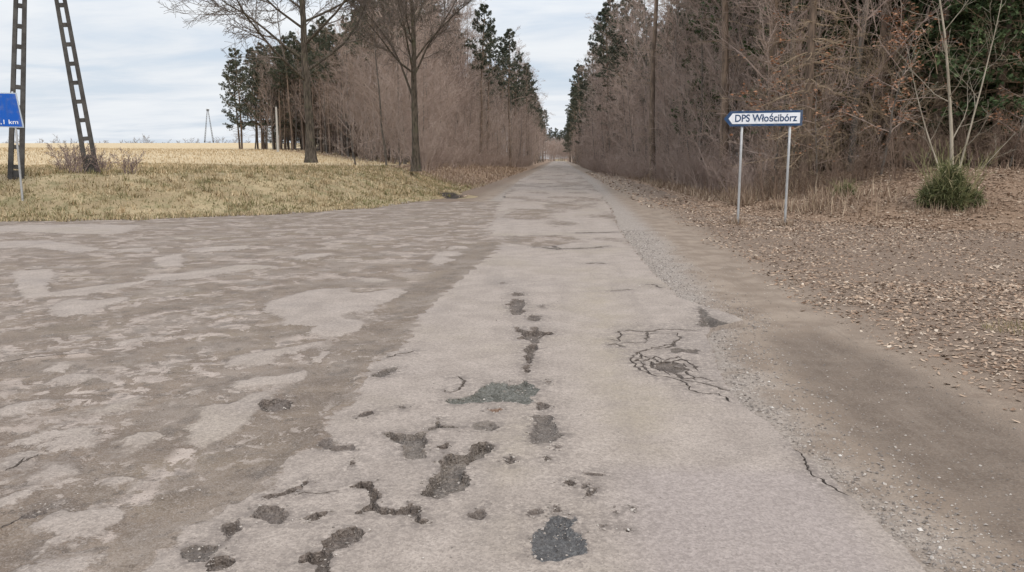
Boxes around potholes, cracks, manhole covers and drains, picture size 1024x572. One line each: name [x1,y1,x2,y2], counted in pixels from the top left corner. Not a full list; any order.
pothole [180,545,219,562]
pothole [697,307,728,328]
pothole [514,327,554,375]
pothole [530,515,588,562]
crack [795,450,849,496]
pothole [250,505,290,524]
pothole [381,417,458,459]
crack [5,454,38,471]
pothole [505,299,526,315]
pothole [420,441,495,500]
pothole [349,481,429,524]
pothole [529,415,566,444]
